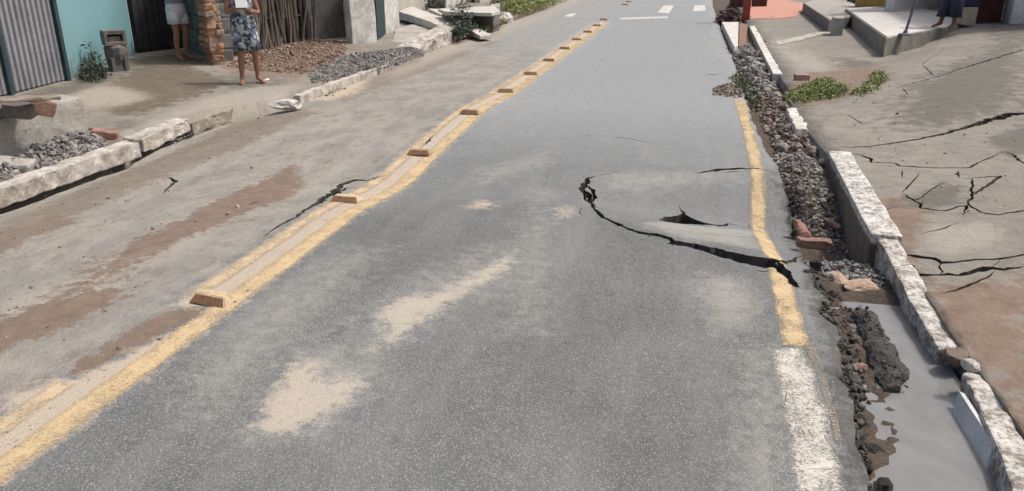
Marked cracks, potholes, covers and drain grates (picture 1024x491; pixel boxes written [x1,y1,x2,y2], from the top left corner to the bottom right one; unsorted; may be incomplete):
crack [578,167,801,287]
crack [249,176,381,236]
crack [819,113,1024,235]
crack [907,254,1024,294]
crack [163,176,178,194]
crack [903,50,1022,94]
